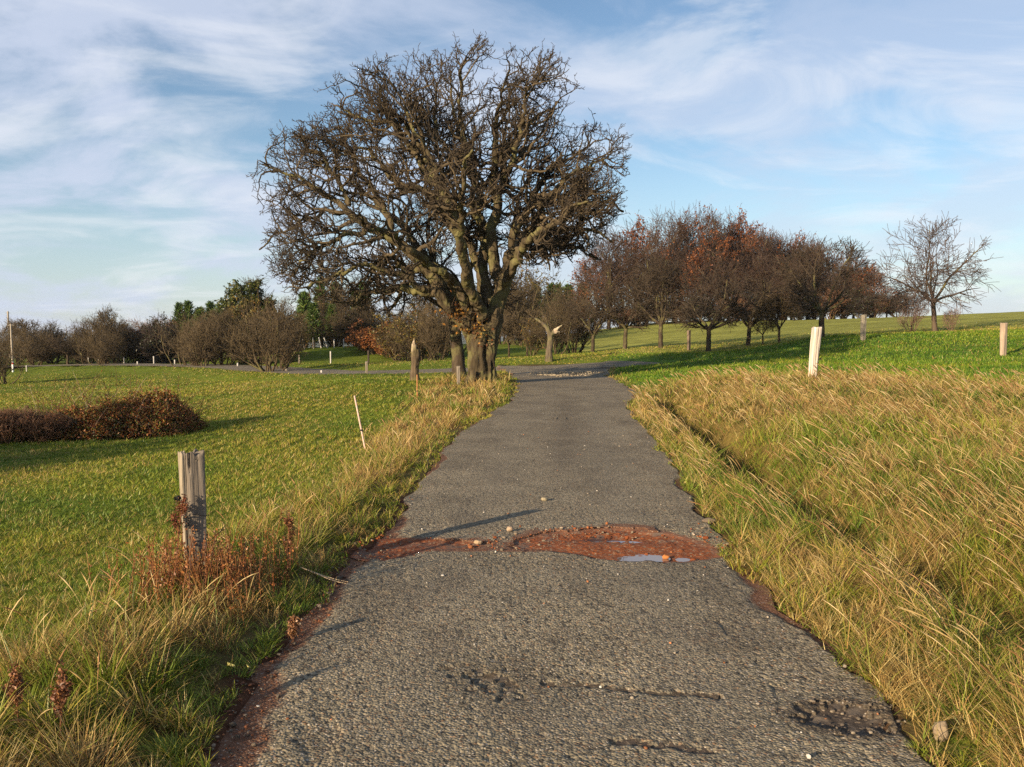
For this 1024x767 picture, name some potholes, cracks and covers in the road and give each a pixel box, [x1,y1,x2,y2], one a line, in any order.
pothole [509,528,723,563]
pothole [445,666,525,698]
pothole [794,703,902,736]
pothole [350,538,491,562]
